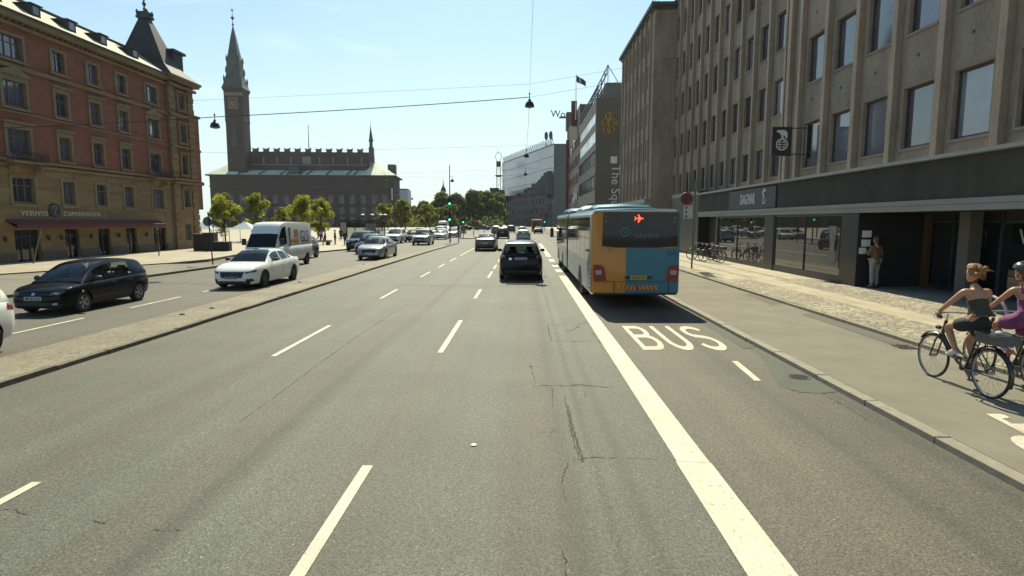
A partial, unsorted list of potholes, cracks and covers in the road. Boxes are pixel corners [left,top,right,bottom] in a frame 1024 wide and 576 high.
crack [530,364,601,408]
